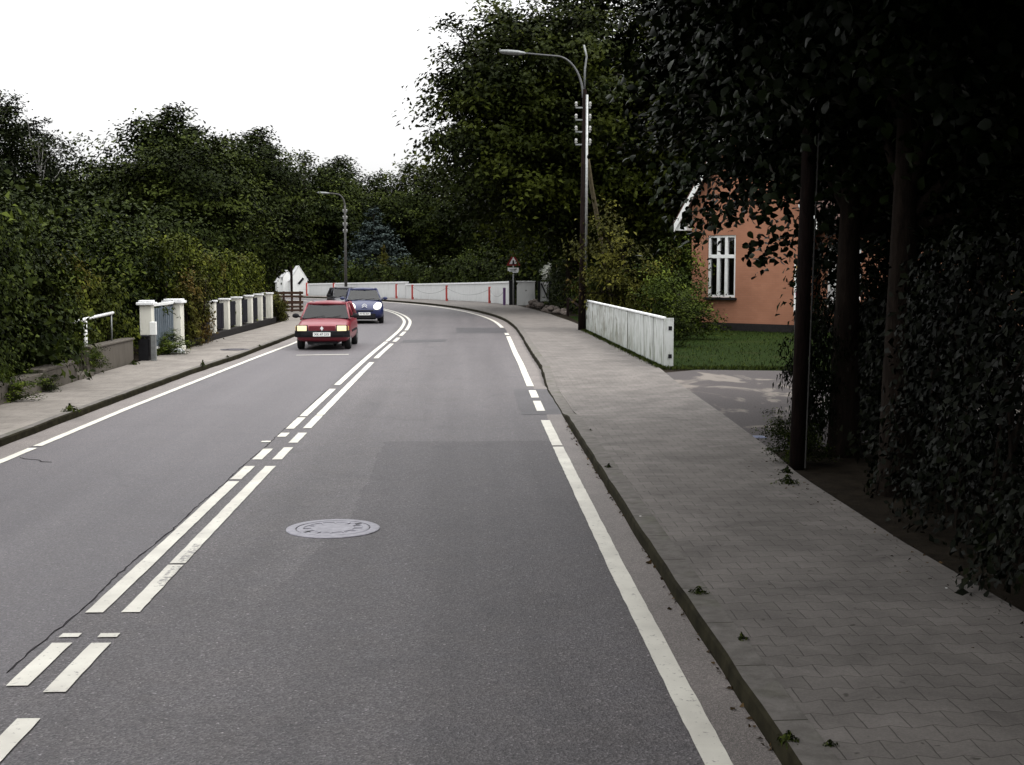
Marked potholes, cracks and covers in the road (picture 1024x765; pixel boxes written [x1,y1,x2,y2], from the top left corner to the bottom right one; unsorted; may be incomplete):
manhole cover [286,519,380,539]
